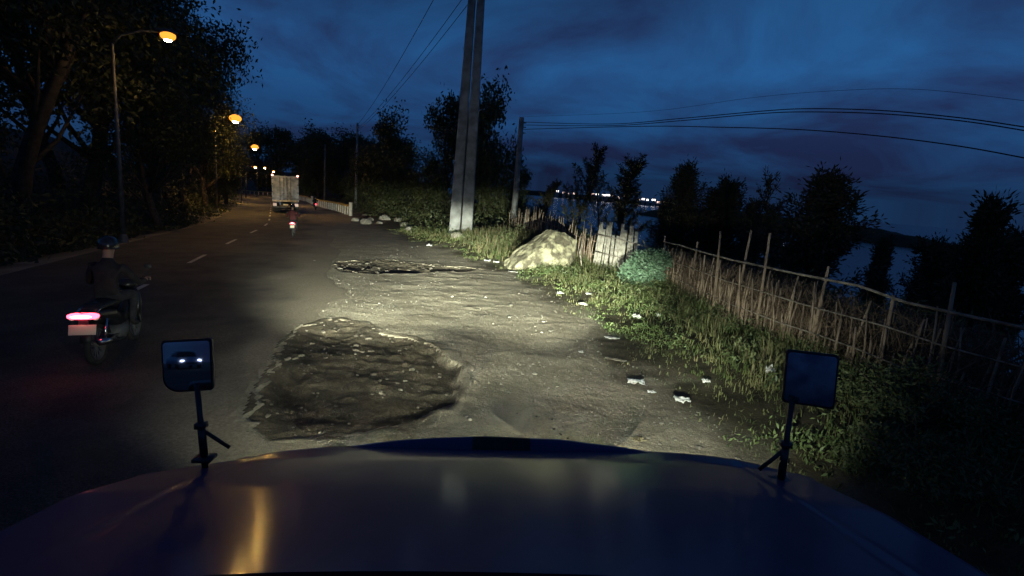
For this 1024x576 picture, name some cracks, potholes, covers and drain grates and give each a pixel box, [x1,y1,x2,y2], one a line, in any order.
pothole [242,318,480,444]
pothole [331,259,489,275]
